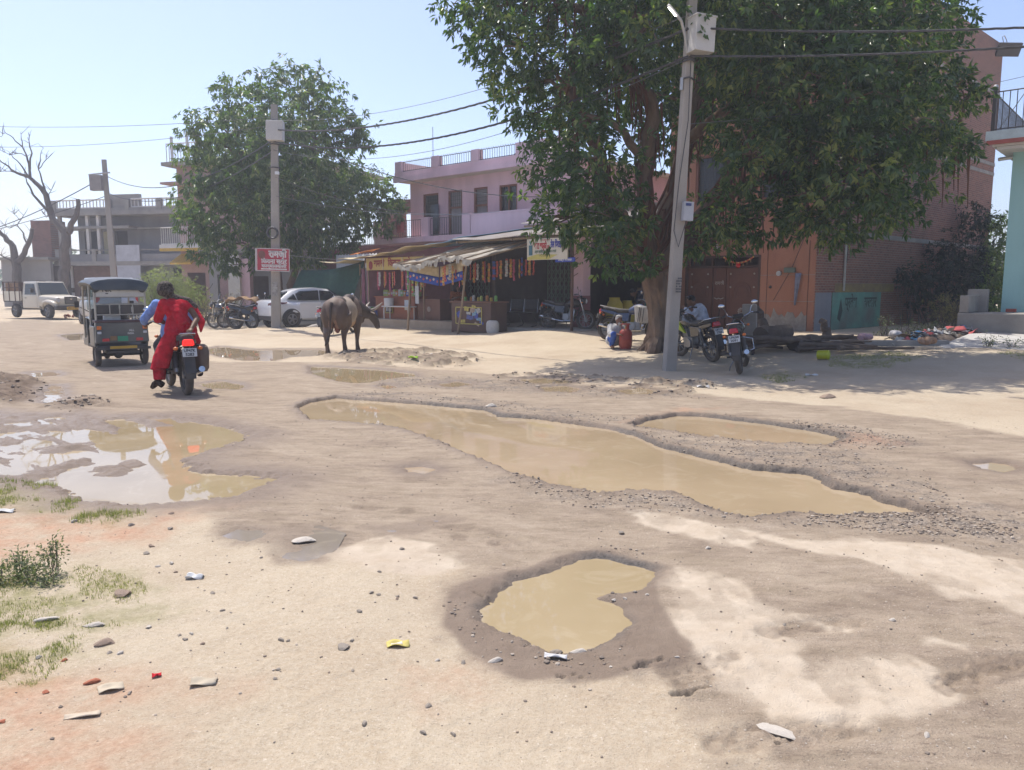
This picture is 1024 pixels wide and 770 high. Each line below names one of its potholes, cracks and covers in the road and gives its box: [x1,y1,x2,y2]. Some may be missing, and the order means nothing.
pothole [306,365,421,383]
pothole [208,345,334,361]
pothole [962,459,1024,473]
pothole [286,394,964,521]
pothole [451,546,684,664]
